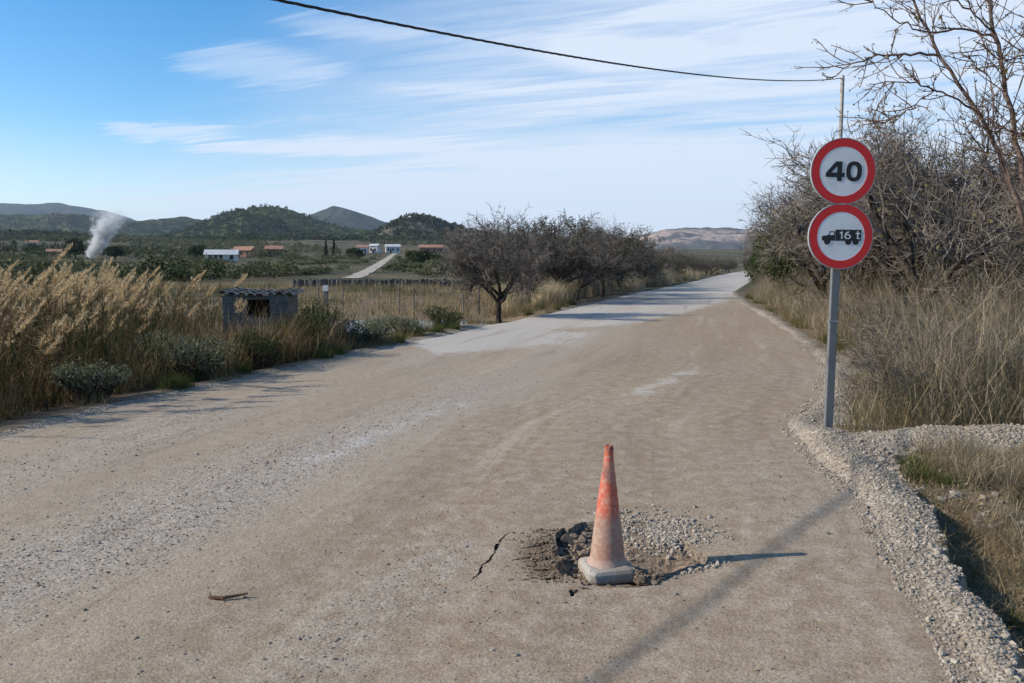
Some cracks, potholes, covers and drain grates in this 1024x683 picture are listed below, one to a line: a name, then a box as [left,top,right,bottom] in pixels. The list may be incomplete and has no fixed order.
pothole [553,518,713,588]
crack [470,532,558,581]
